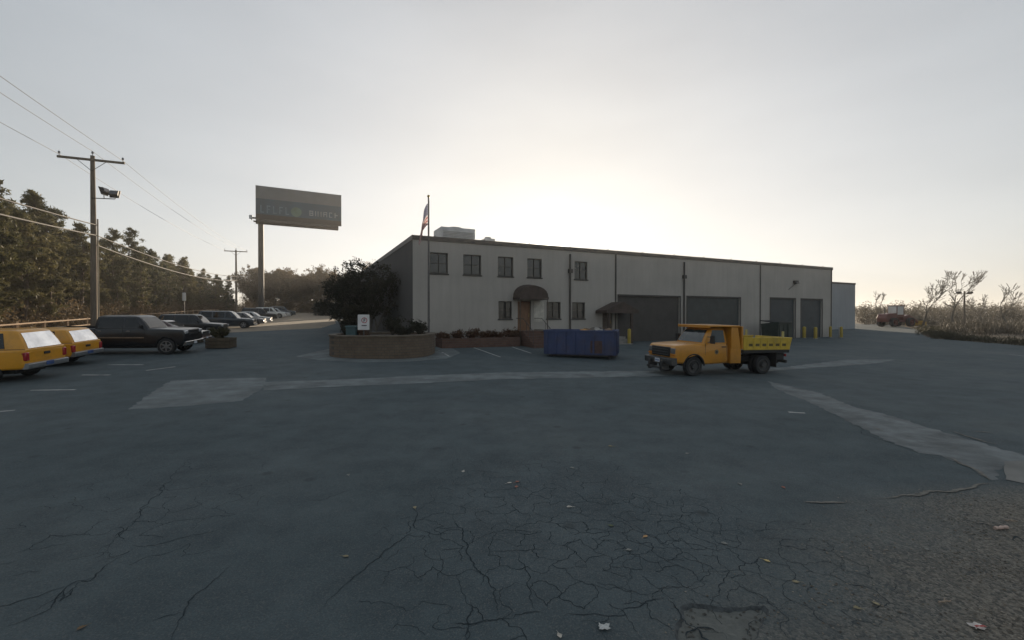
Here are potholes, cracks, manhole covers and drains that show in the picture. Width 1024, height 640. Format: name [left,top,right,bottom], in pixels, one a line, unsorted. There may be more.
crack [153,568,227,640]
crack [326,453,921,640]
pothole [675,603,769,640]
crack [1,460,265,625]
crack [887,431,995,498]
